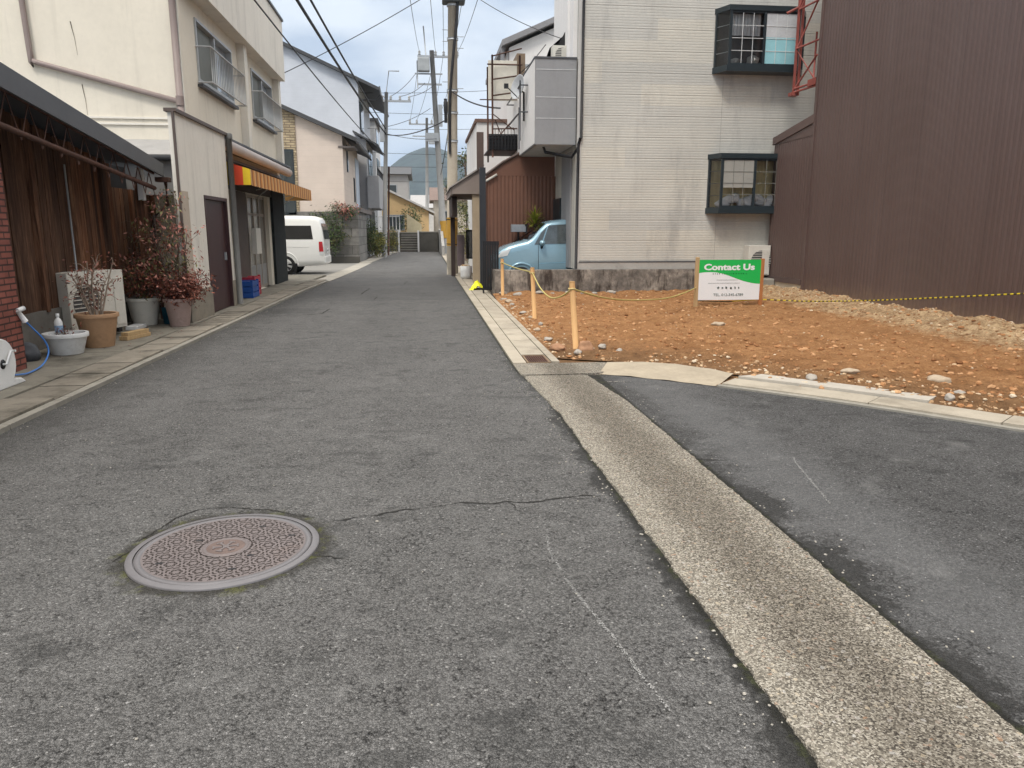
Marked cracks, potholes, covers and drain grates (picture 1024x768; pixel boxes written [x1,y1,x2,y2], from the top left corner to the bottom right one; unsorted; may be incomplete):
crack [329,495,593,522]
manhole cover [124,514,320,592]
drain grate [522,355,551,363]
crack [108,507,309,563]
